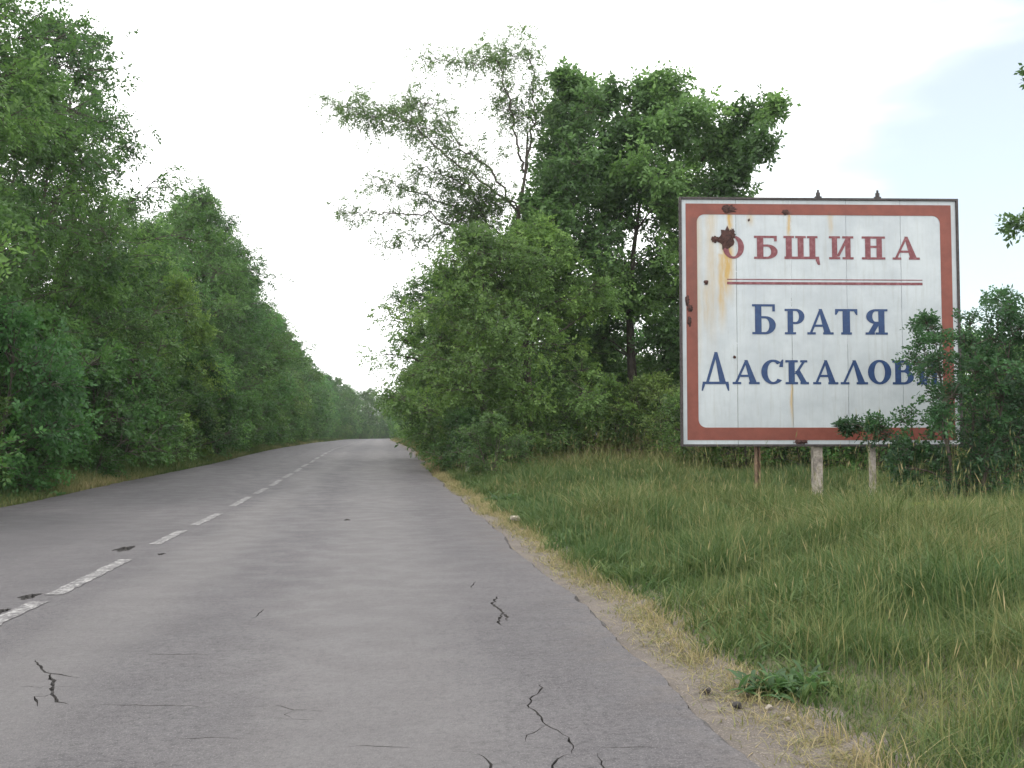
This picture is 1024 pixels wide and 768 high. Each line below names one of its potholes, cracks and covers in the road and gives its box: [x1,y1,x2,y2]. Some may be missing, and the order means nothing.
crack [29,660,78,706]
crack [525,684,574,768]
crack [471,581,509,626]
